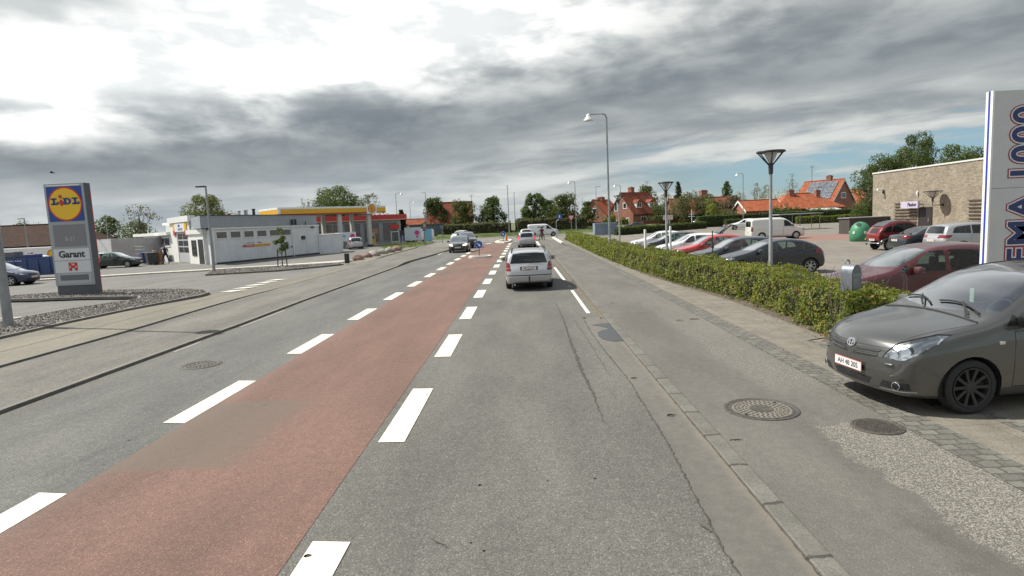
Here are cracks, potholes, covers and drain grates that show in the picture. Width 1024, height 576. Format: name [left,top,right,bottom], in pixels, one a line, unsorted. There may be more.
crack [556,304,821,576]
manhole cover [724,398,801,421]
manhole cover [850,418,906,435]
manhole cover [179,360,223,370]
